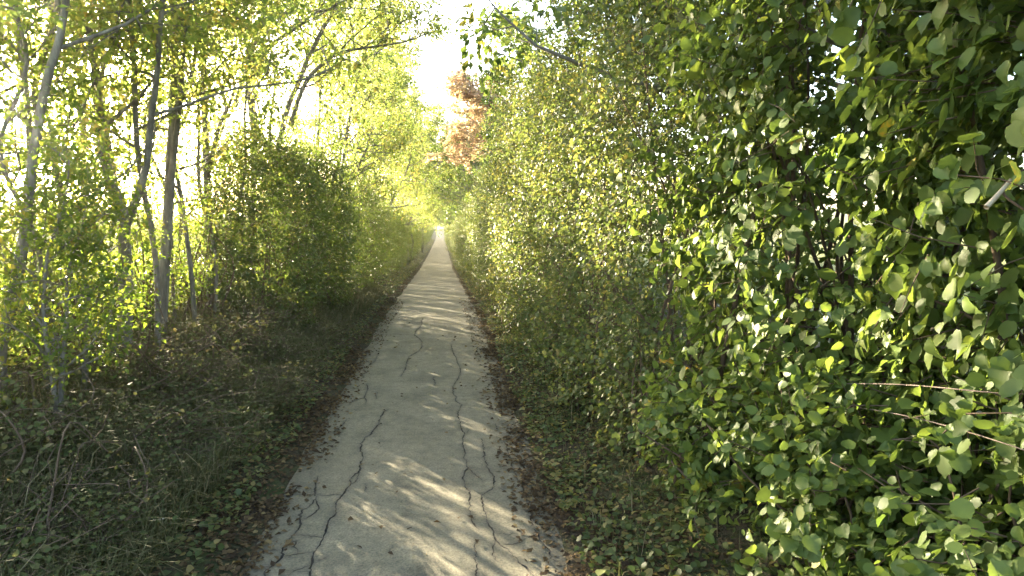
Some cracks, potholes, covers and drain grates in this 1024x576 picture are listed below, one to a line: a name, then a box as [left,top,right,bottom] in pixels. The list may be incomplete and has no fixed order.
crack [263,385,385,576]
crack [433,344,562,576]
